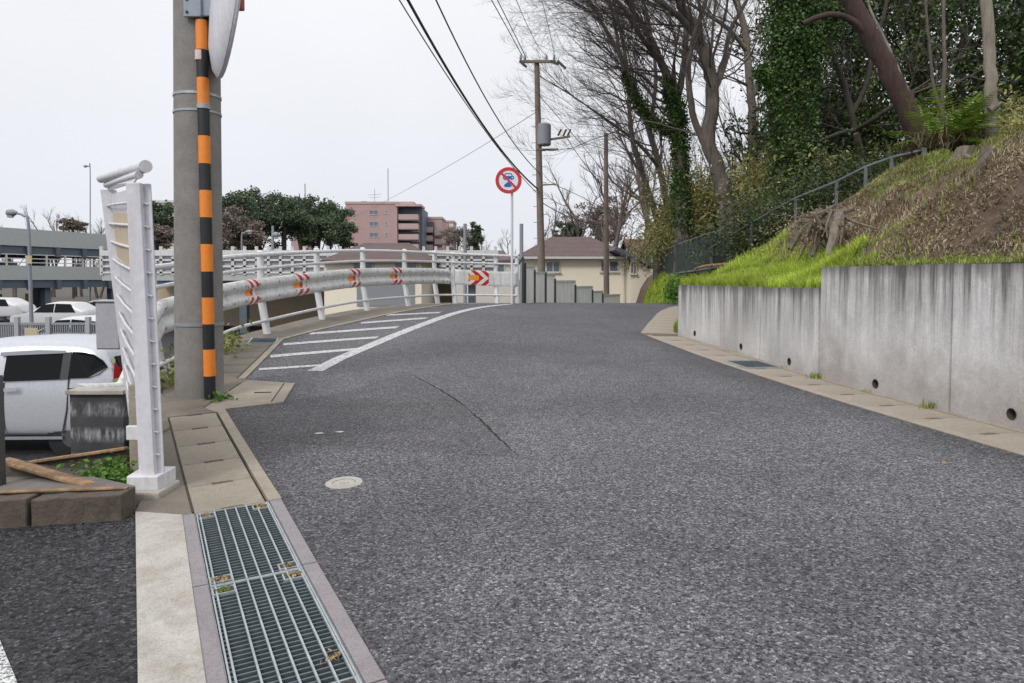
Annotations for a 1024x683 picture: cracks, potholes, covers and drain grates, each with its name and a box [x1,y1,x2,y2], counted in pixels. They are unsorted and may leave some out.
drain grate [210,568,362,683]
drain grate [724,360,782,369]
drain grate [196,502,302,589]
crack [403,371,518,455]
manhole cover [325,476,363,489]
